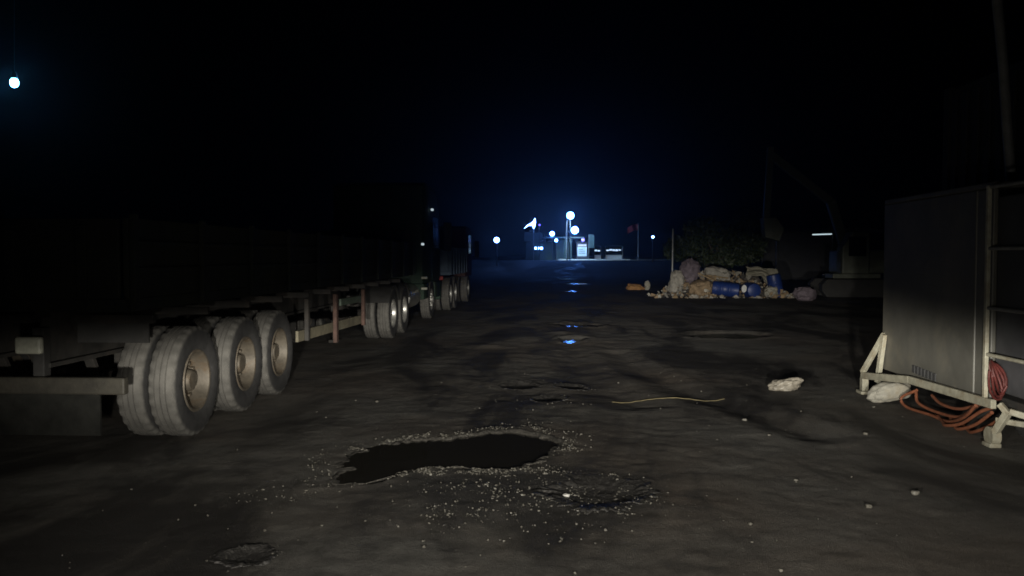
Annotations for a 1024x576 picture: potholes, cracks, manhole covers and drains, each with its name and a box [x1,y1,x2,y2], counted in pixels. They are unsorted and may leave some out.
pothole [209,544,279,568]
pothole [554,383,592,391]
pothole [327,428,566,485]
pothole [527,394,570,402]
pothole [529,473,662,514]
pothole [497,380,544,390]
